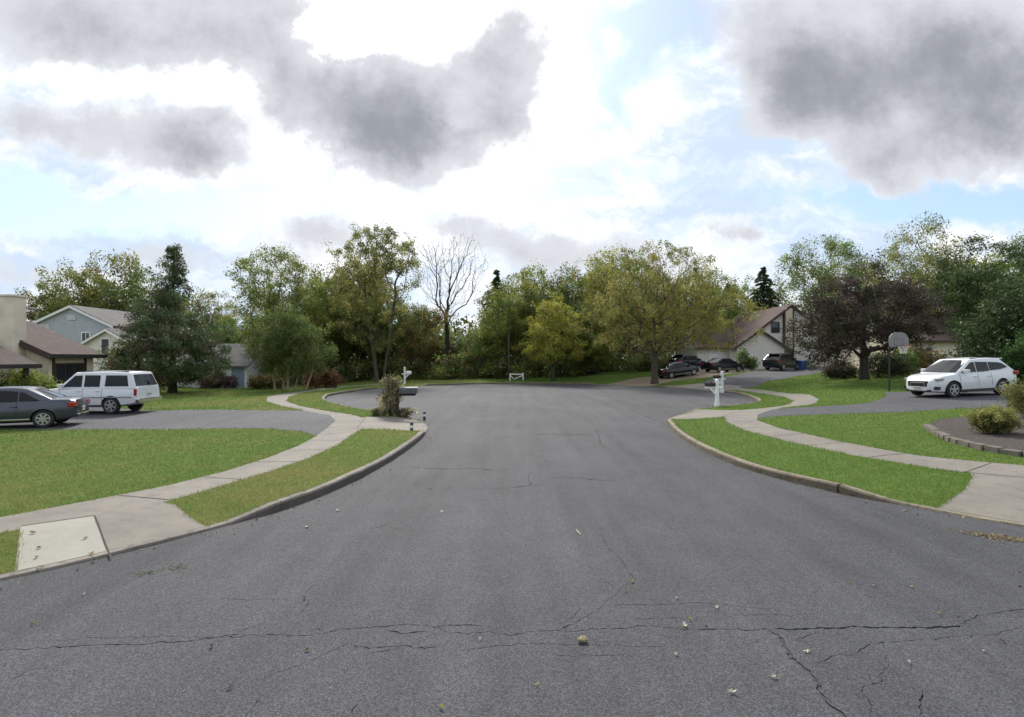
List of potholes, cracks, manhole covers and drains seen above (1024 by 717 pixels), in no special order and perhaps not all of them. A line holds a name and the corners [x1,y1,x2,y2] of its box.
crack [7,535,1023,717]
